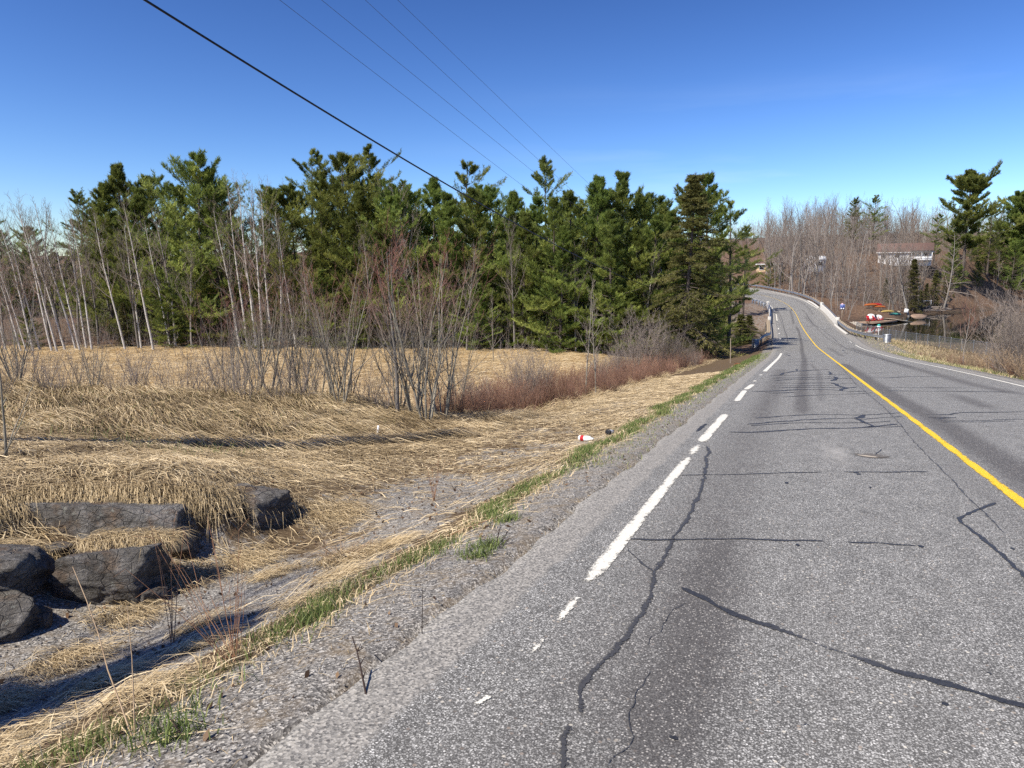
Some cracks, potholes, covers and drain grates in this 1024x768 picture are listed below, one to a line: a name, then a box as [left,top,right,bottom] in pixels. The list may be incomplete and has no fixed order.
crack [607,672,650,765]
